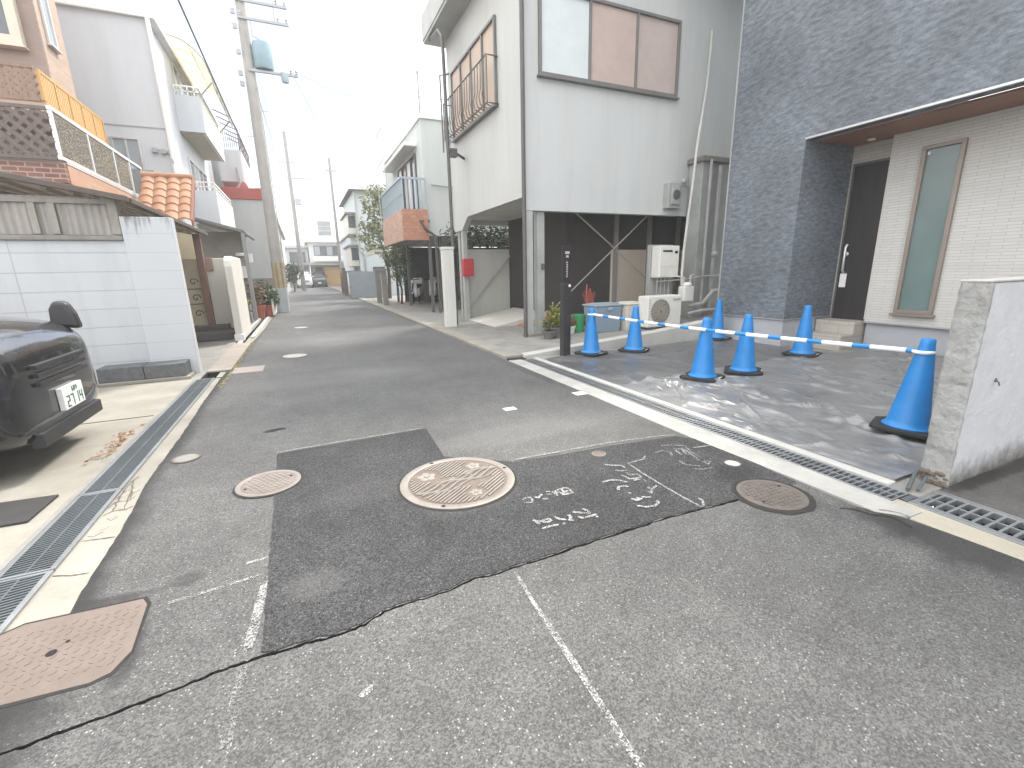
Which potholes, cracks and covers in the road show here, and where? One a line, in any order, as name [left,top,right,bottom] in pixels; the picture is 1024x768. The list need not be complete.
utility cover [170,453,201,464]
crack [85,476,146,541]
drain grate [0,569,54,634]
drain grate [908,490,1024,546]
crack [0,499,738,754]
crack [841,508,913,528]
manhole cover [233,470,303,498]
drain grate [0,488,122,581]
manhole cover [397,457,517,511]
manhole cover [731,478,817,515]
drain grate [79,378,215,495]
